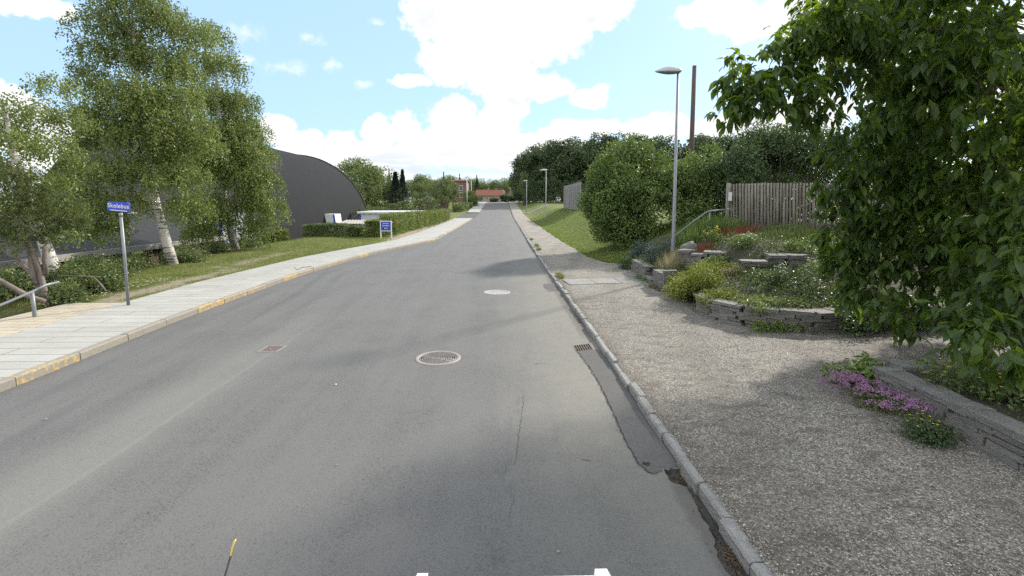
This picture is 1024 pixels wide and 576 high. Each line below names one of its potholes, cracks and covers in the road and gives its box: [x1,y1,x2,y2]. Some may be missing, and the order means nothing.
drain grate [573,343,593,352]
manhole cover [415,351,461,366]
